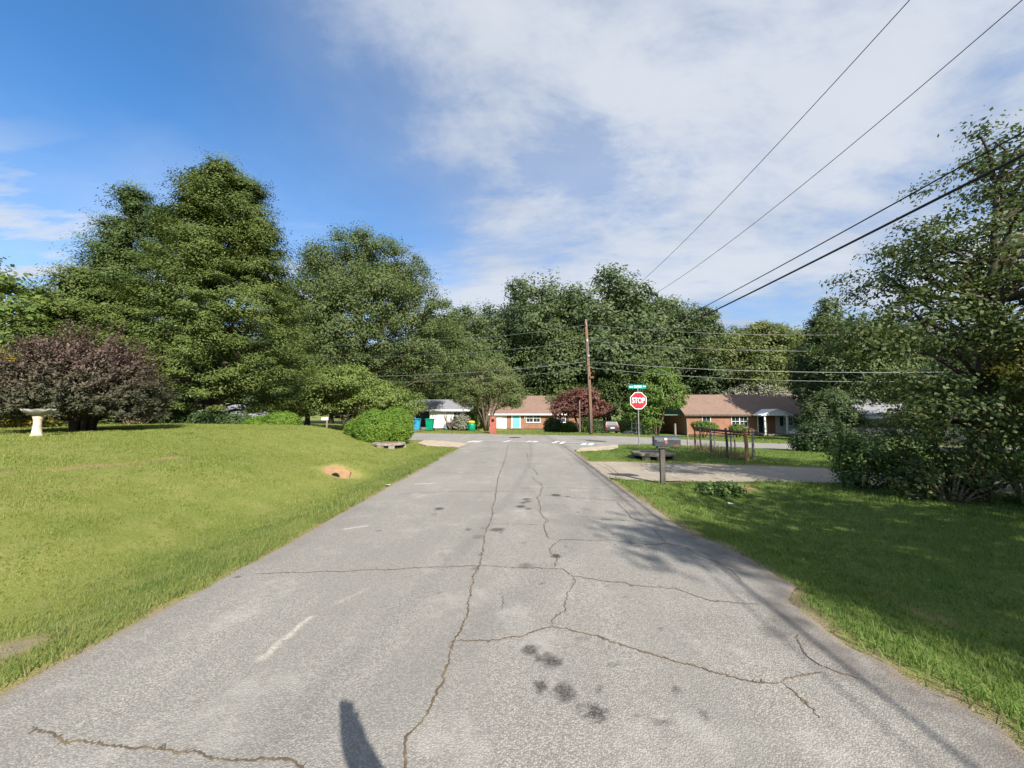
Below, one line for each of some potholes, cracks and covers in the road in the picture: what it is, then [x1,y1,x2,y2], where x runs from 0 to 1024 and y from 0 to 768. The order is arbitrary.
crack [260,446,868,768]
crack [28,726,306,768]
